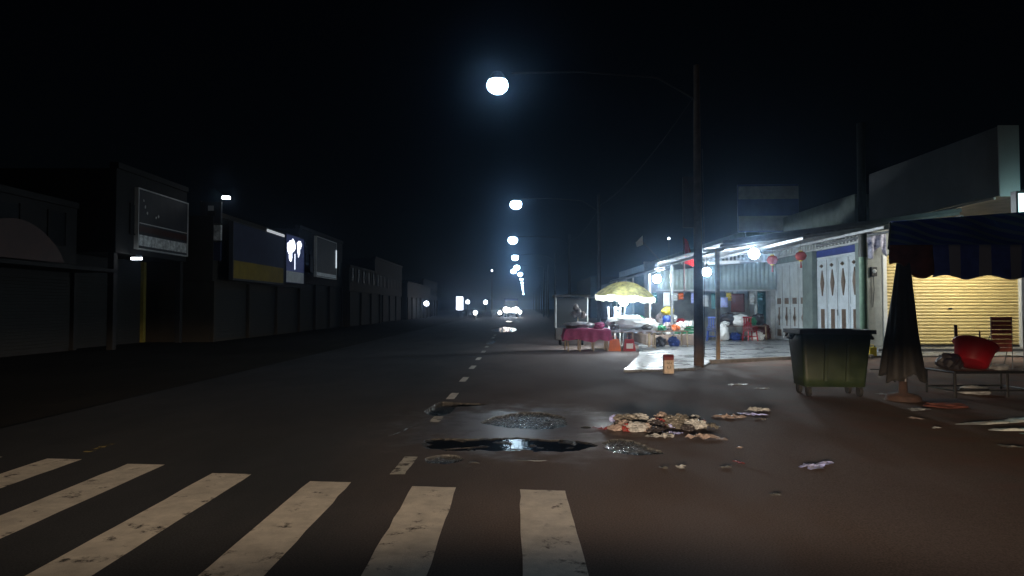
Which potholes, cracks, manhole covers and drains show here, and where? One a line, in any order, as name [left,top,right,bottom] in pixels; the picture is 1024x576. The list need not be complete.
pothole [422,437,598,452]
pothole [425,455,464,464]
pothole [424,402,486,416]
pothole [602,439,664,455]
pothole [481,412,567,430]
